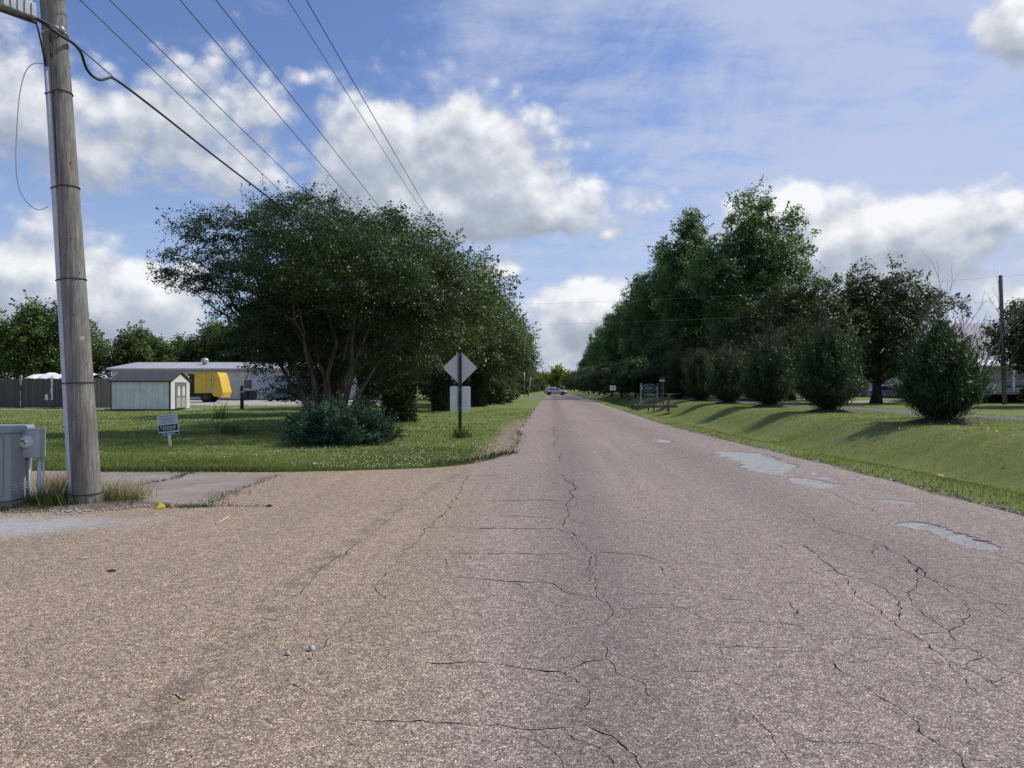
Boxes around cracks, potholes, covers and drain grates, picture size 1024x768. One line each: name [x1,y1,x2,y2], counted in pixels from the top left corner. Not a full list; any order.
crack [456,474,1023,768]
crack [294,642,658,768]
crack [374,474,470,596]
